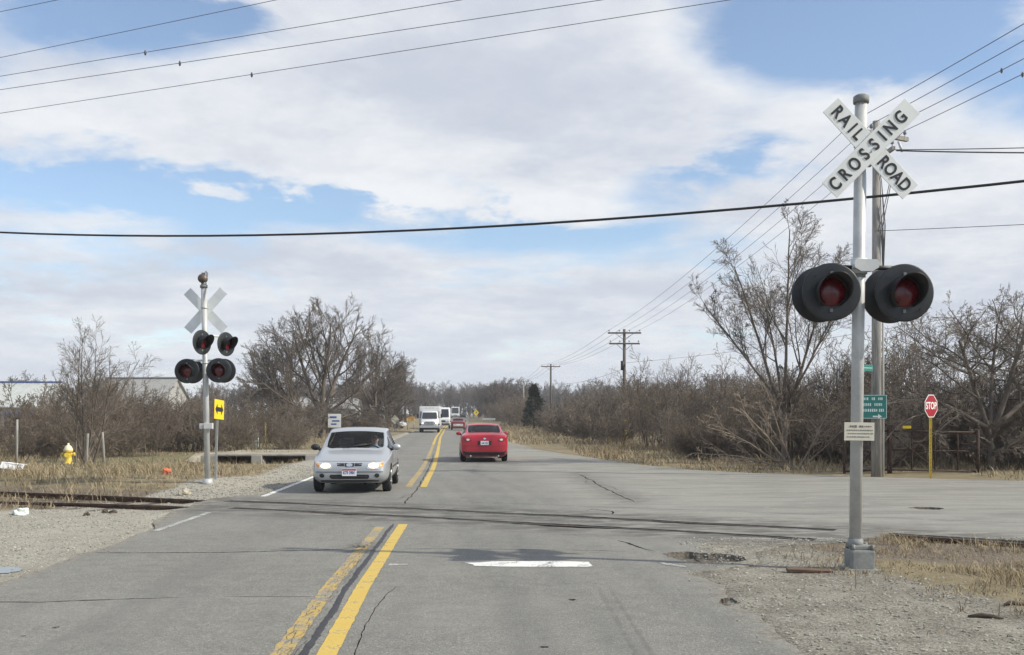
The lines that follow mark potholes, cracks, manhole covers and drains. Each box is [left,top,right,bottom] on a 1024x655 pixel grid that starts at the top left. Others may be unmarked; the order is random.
crack [581,475,633,514]
crack [398,454,434,505]
pothole [662,551,746,564]
